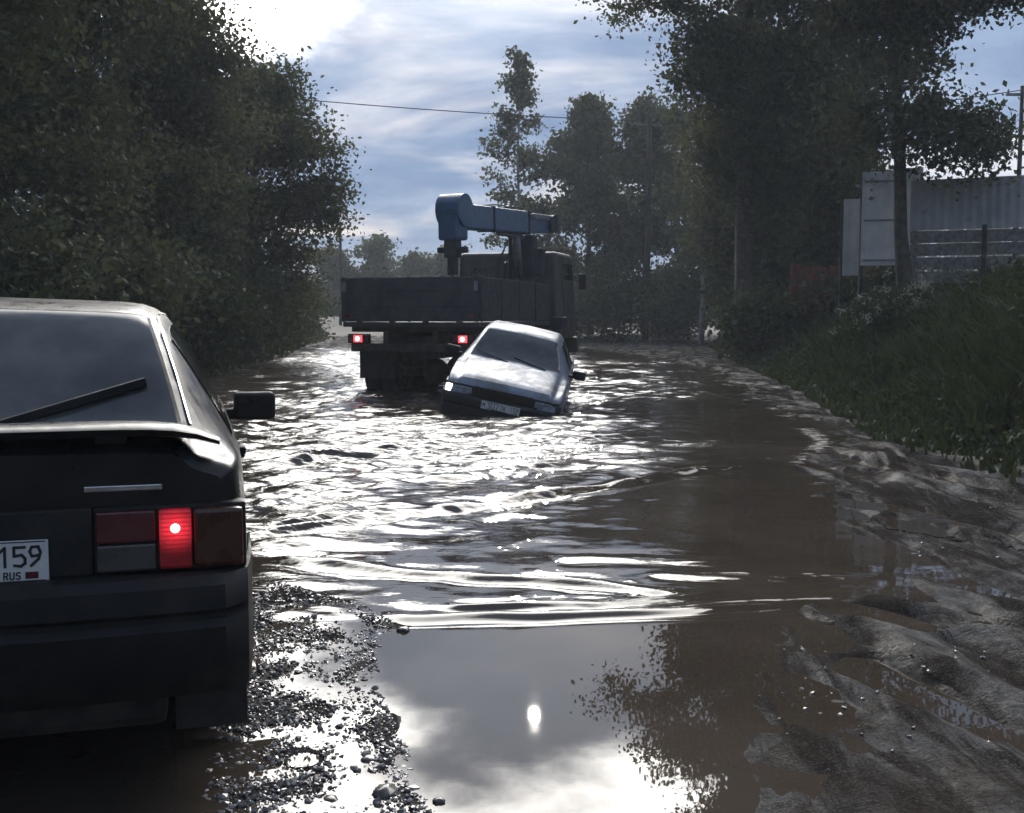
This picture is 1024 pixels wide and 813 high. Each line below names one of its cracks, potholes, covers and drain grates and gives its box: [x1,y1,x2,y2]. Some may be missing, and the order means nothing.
pothole [0,594,1024,813]
